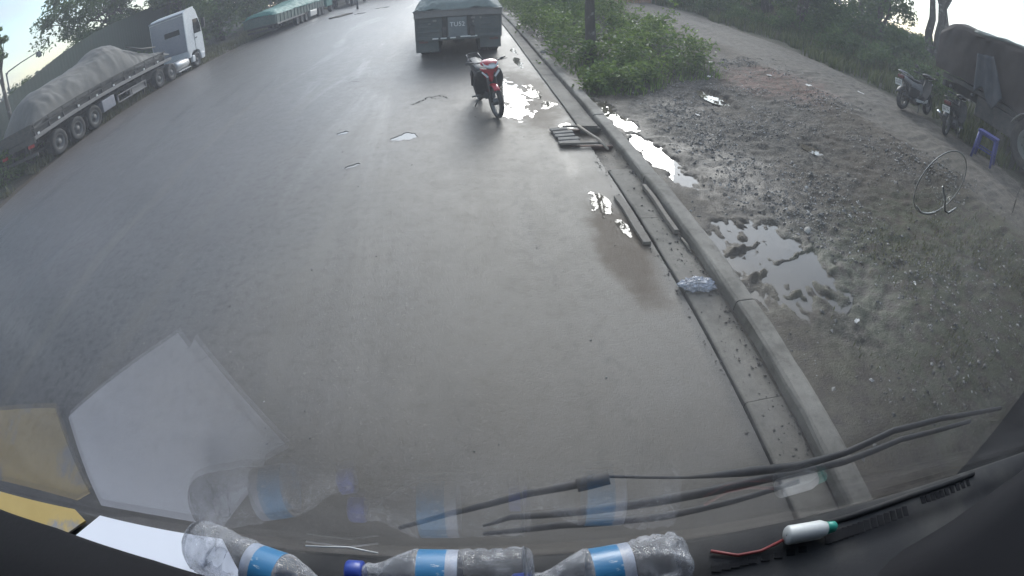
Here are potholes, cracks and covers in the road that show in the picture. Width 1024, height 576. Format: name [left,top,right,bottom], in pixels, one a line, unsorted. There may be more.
pothole [388,132,420,141]
